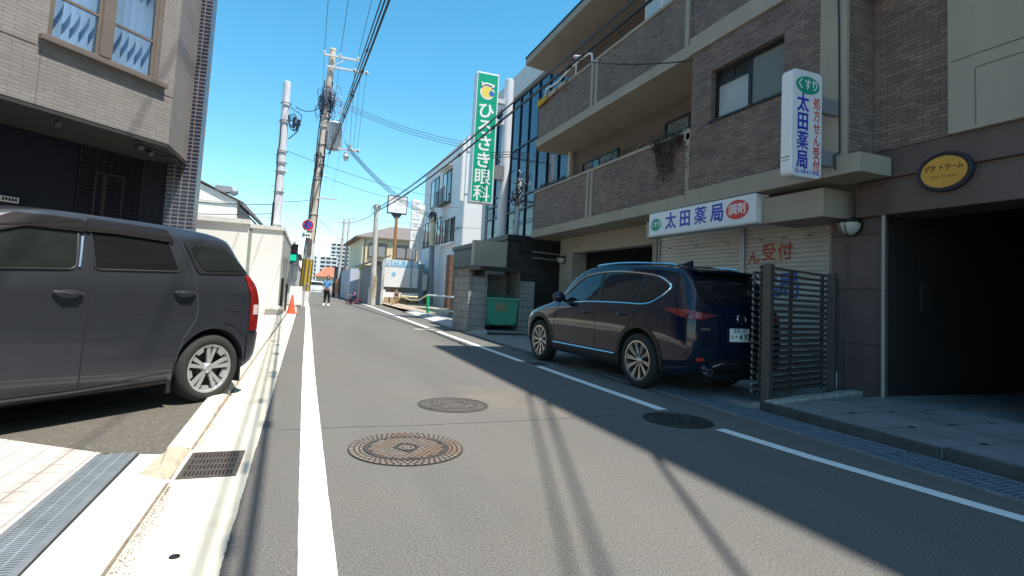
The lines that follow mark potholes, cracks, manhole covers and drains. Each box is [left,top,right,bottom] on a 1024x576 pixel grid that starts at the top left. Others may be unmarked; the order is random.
drain grate [175,450,245,480]
manhole cover [642,412,714,429]
manhole cover [417,397,488,413]
manhole cover [347,433,463,467]
